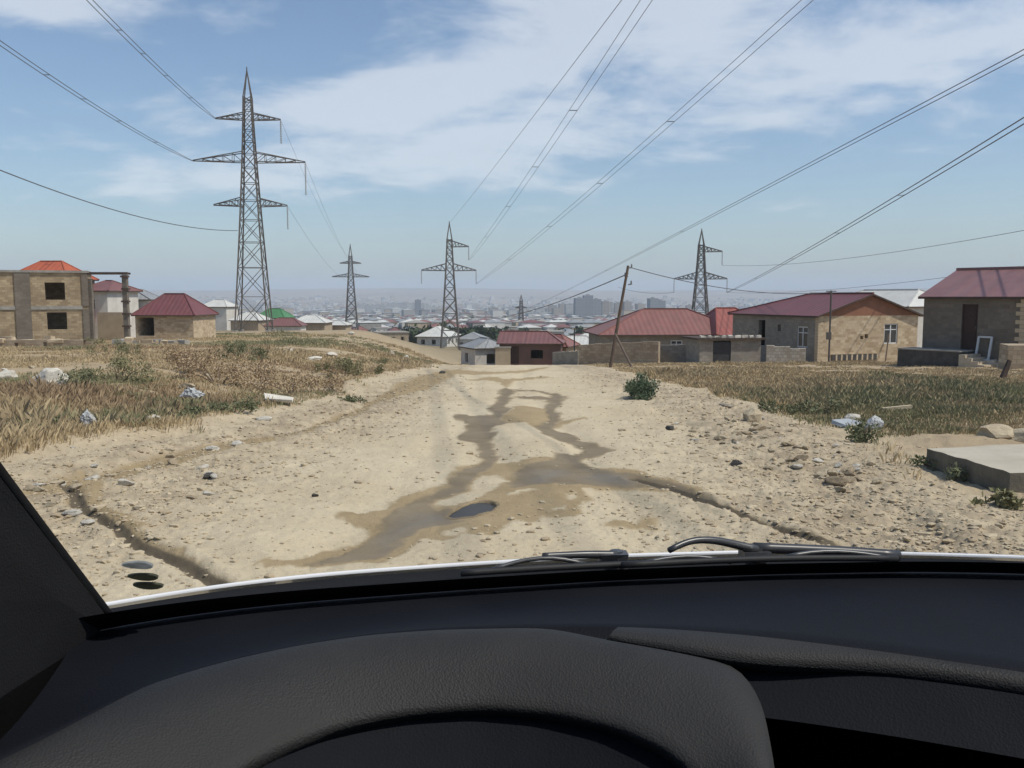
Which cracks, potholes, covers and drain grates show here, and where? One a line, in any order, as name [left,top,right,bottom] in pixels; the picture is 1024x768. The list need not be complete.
pothole [443,500,500,520]
